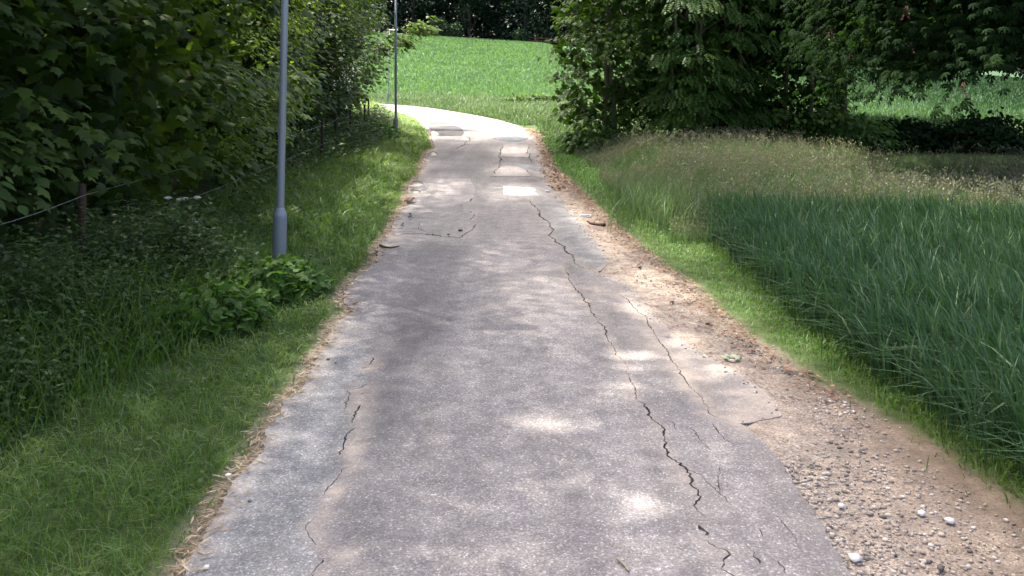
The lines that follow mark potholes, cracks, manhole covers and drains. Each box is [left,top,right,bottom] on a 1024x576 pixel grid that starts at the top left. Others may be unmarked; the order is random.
crack [529,200,797,576]
crack [399,198,477,238]
